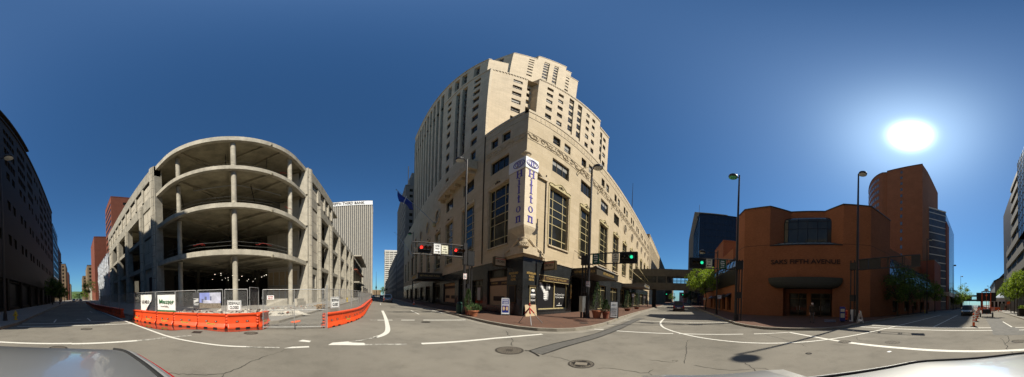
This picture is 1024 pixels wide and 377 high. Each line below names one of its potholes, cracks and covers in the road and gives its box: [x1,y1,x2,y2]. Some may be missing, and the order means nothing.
crack [612,340,768,374]
manhole cover [495,346,524,354]
manhole cover [568,360,594,368]
